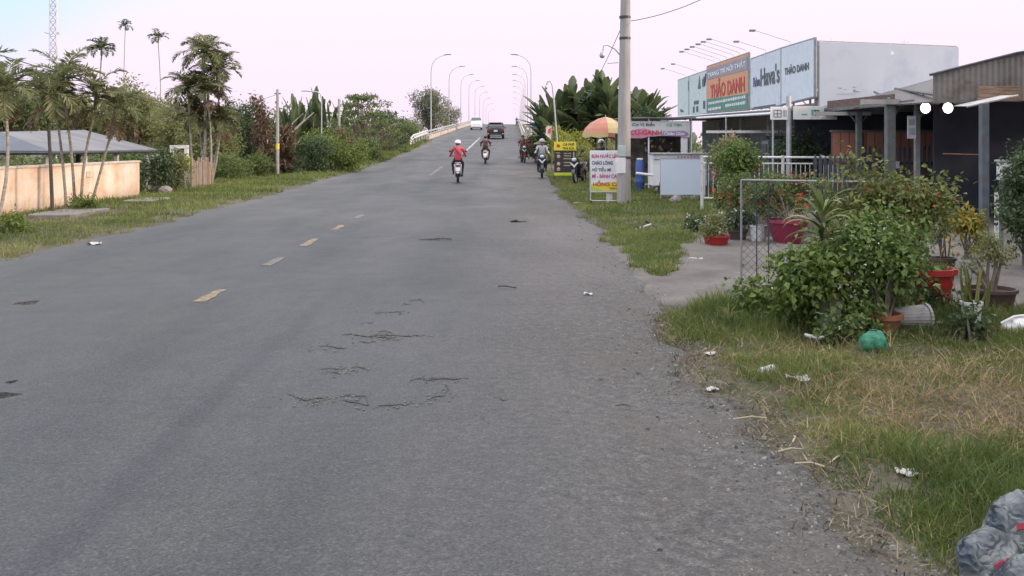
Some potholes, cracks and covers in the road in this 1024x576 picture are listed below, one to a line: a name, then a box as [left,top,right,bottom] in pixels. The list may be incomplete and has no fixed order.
crack [272,298,469,411]
